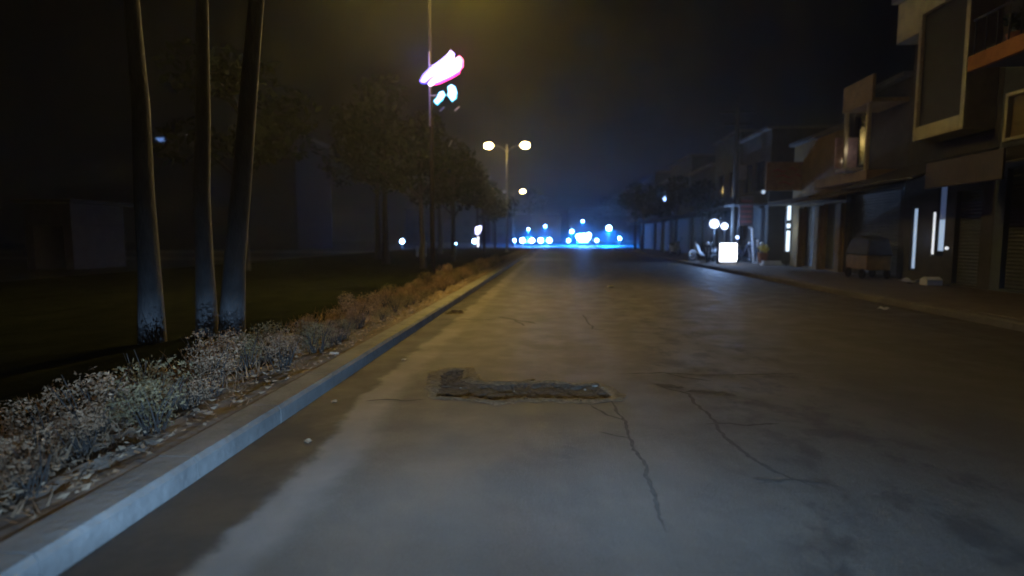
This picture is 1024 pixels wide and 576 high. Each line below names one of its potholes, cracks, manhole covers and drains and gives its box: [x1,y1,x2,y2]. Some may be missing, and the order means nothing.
pothole [424,367,626,406]
crack [467,316,536,326]
crack [592,372,823,532]
